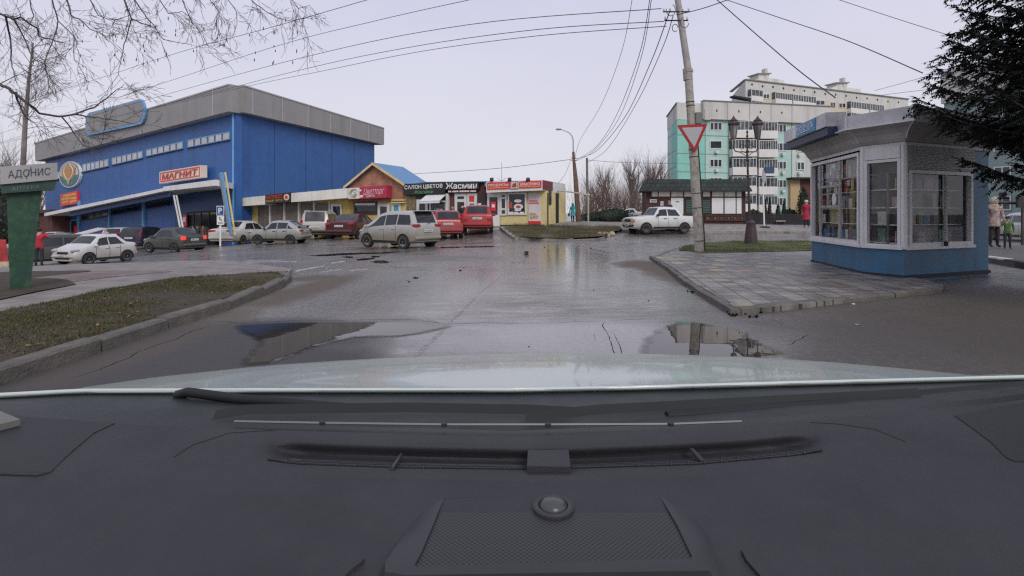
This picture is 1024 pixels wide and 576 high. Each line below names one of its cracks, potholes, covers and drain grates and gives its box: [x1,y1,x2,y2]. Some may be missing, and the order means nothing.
crack [74,327,205,378]
